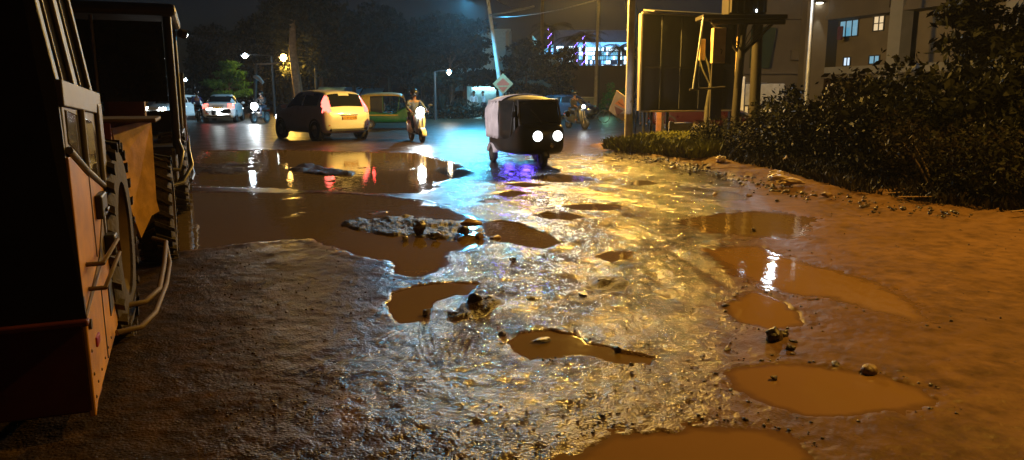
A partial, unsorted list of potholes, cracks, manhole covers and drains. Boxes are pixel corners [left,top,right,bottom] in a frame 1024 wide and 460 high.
pothole [695,355,974,429]
pothole [369,278,496,327]
pothole [490,181,558,189]
pothole [490,323,687,373]
pothole [192,149,489,196]
pothole [692,242,957,328]
pothole [522,209,598,222]
pothole [462,197,510,206]
pothole [483,218,576,251]
pothole [482,189,539,199]
pothole [653,207,836,245]
pothole [531,414,848,460]
